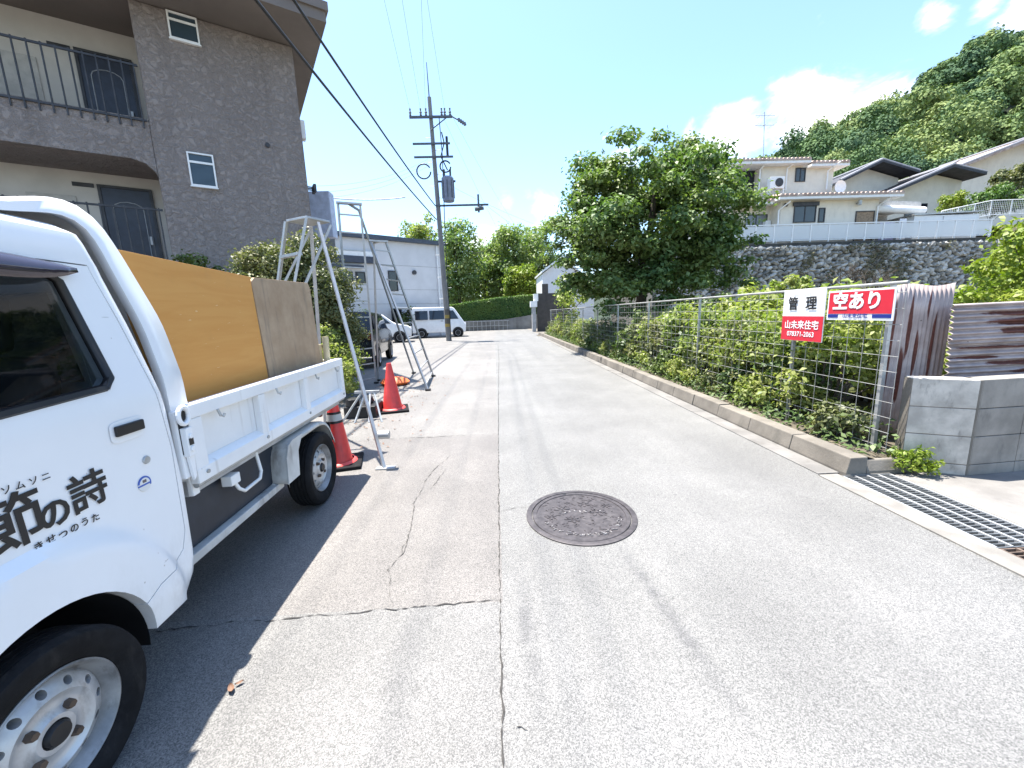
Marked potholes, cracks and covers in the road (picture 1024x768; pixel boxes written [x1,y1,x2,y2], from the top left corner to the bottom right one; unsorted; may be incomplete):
manhole cover [526,491,638,547]
drain grate [844,474,1024,549]
drain grate [1001,547,1024,560]
crack [156,599,499,632]
crack [387,462,444,603]
